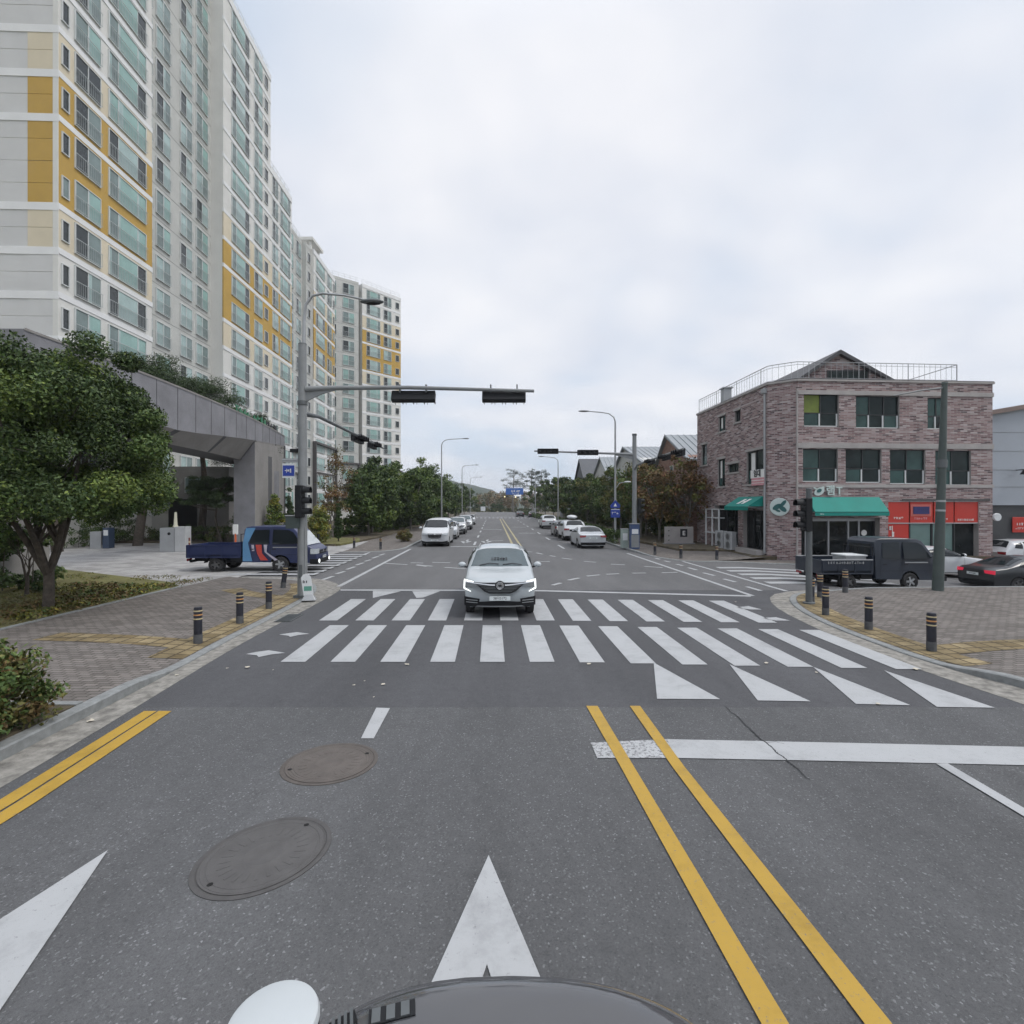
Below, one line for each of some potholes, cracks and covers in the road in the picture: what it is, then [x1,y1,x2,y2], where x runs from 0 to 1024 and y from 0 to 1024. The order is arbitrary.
crack [726,707,810,780]
manhole cover [188,817,332,901]
manhole cover [280,743,378,786]
